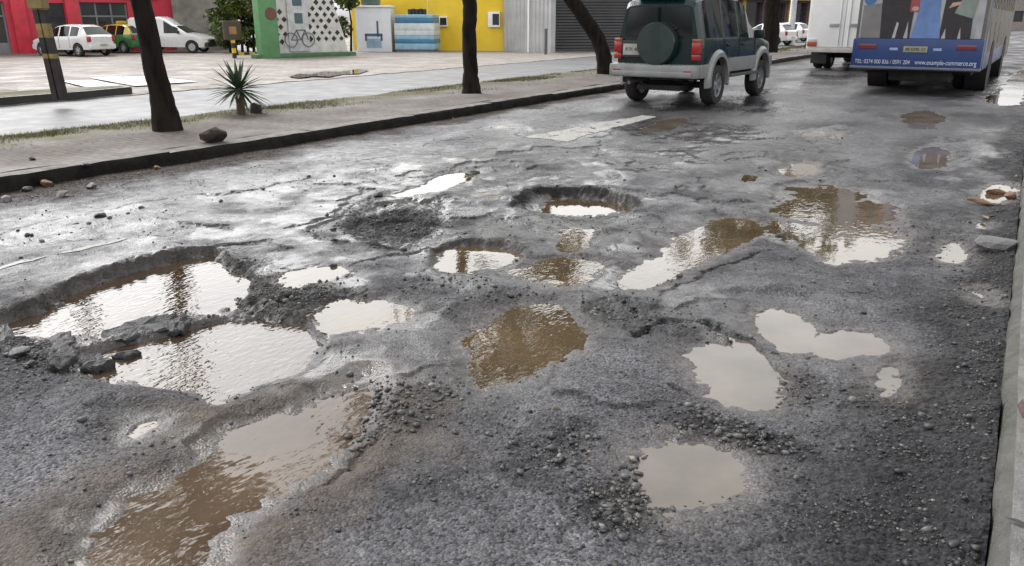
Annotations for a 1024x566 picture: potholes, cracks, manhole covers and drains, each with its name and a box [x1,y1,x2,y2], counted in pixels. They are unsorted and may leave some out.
pothole [503,185,648,238]
pothole [637,326,821,434]
pothole [0,245,339,415]
pothole [229,256,373,330]
pothole [583,210,790,299]
pothole [587,420,790,554]
pothole [420,290,617,412]
pothole [306,289,440,356]
pothole [21,358,421,566]
pothole [749,177,932,275]
pothole [420,237,534,276]
pothole [480,250,621,296]
